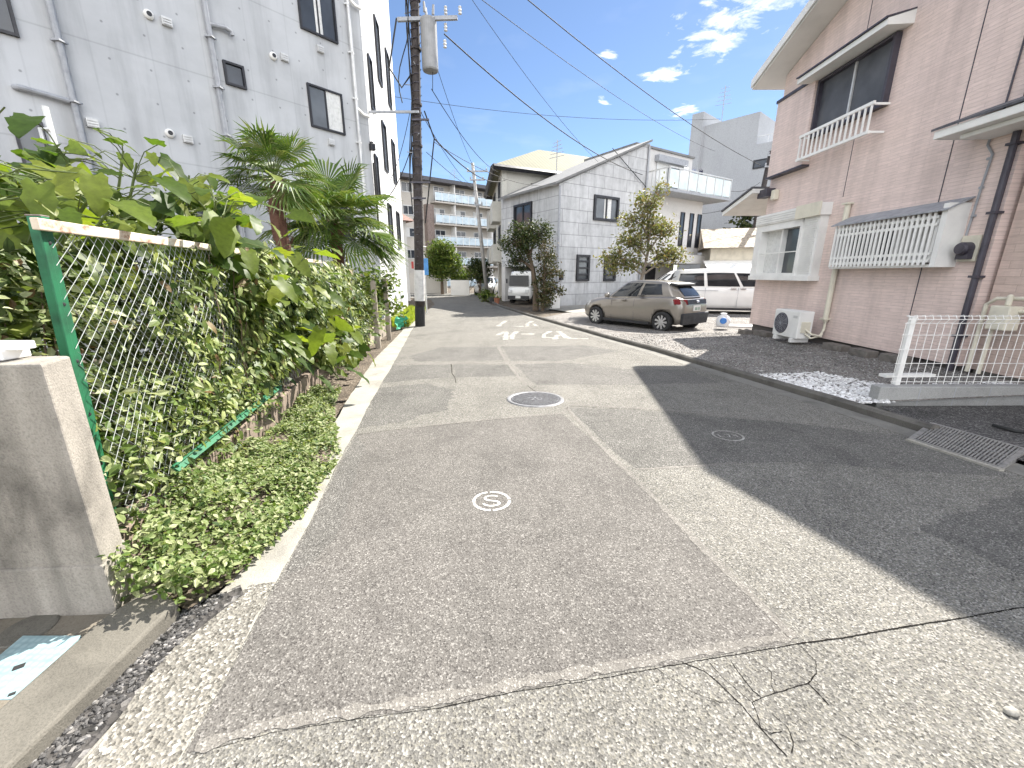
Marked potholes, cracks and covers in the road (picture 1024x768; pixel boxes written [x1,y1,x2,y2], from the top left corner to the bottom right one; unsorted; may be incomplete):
manhole cover [506,391,564,407]
drain grate [905,422,1024,471]
utility cover [712,430,745,441]
crack [190,607,1024,757]
